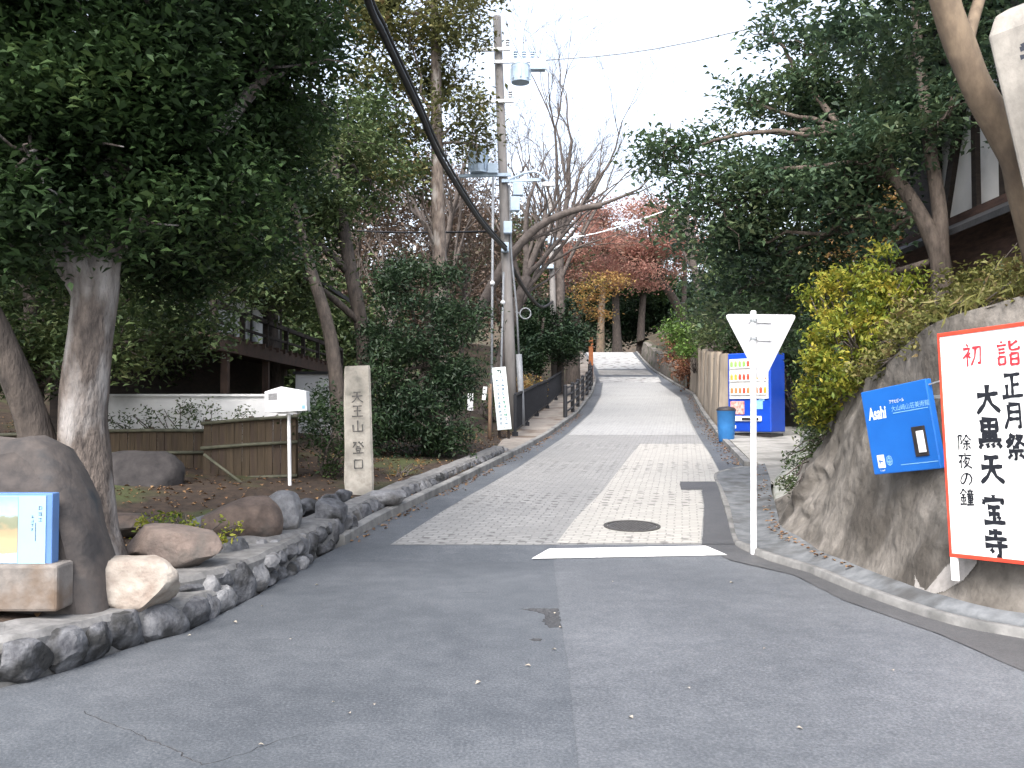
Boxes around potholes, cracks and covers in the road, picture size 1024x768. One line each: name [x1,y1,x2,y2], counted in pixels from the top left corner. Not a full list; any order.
manhole cover [603,520,661,532]
crack [84,711,306,765]
